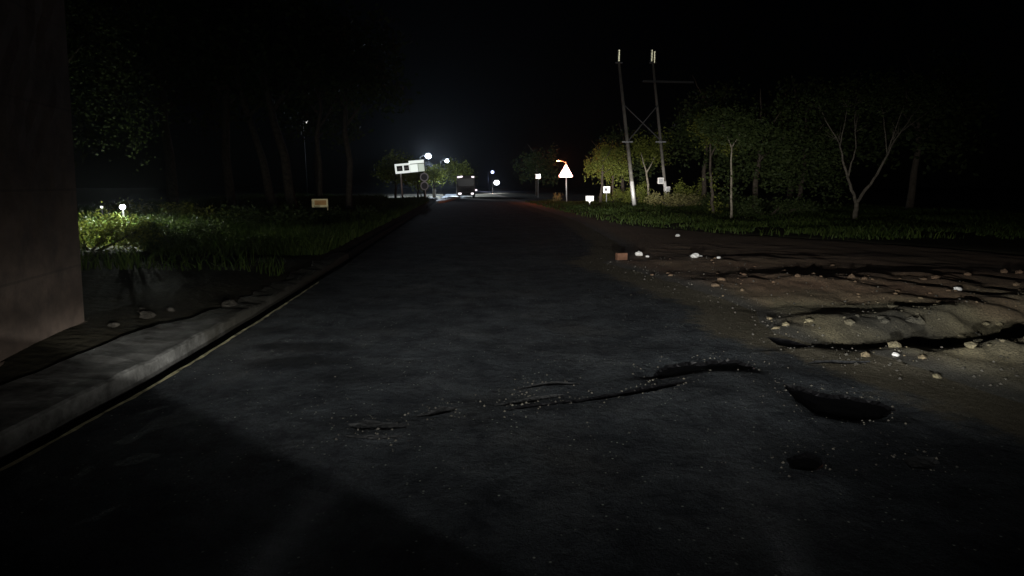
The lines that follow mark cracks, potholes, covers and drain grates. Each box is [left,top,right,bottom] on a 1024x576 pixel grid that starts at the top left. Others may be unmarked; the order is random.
pothole [767,337,810,348]
pothole [783,383,896,422]
crack [495,381,687,411]
pothole [786,452,824,471]
pothole [650,360,755,379]
